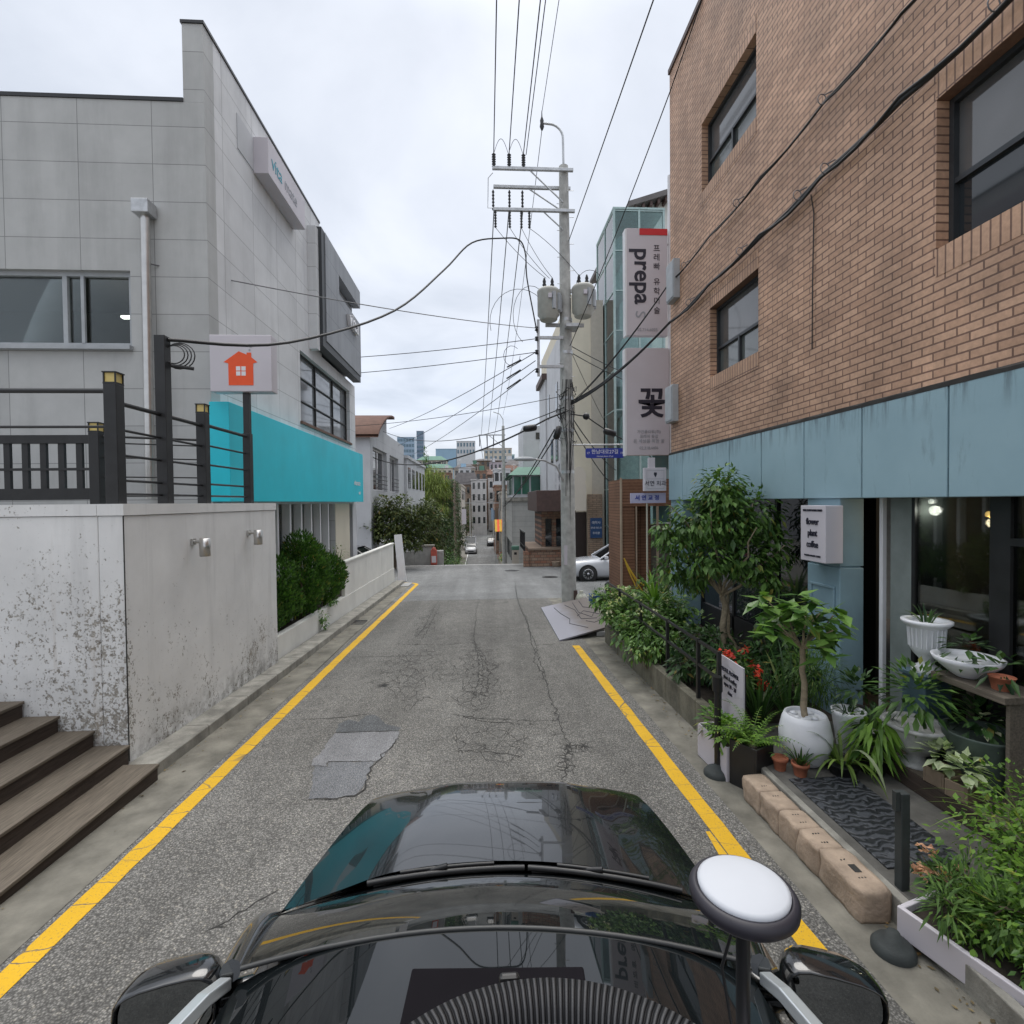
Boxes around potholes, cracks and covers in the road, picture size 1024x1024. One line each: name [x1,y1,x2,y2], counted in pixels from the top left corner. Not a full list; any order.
crack [204,889,279,932]
crack [363,582,599,782]
